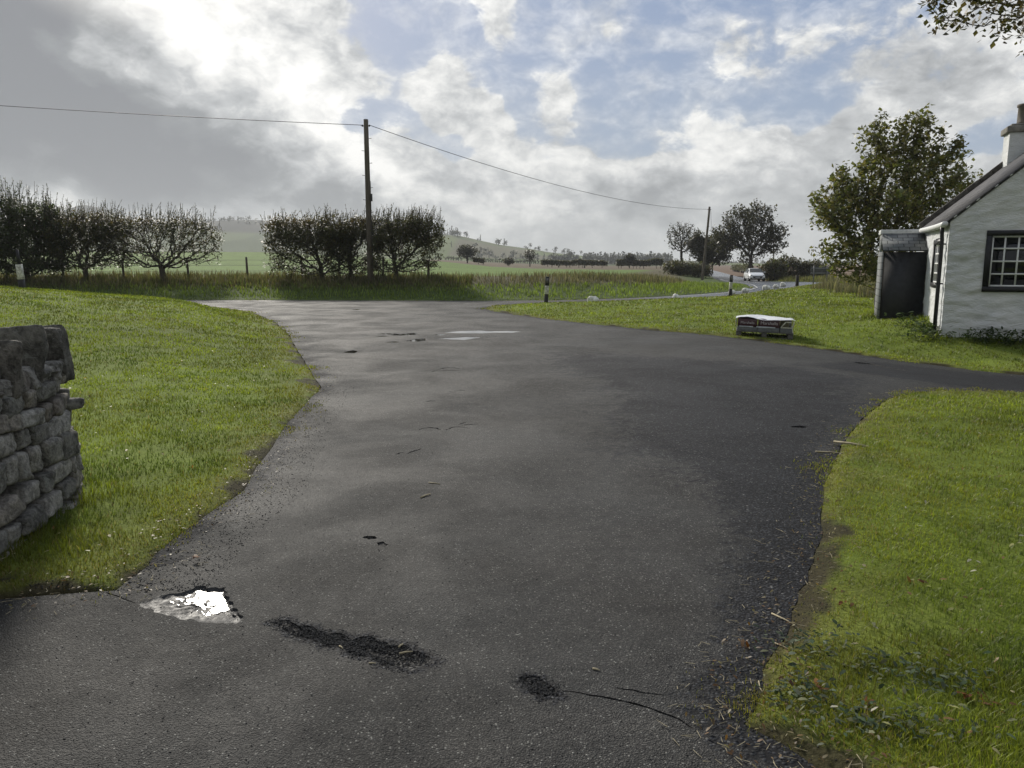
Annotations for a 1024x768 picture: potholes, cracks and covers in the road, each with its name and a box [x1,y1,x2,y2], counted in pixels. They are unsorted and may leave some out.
pothole [519,675,561,698]
pothole [273,620,434,671]
pothole [140,586,244,624]
